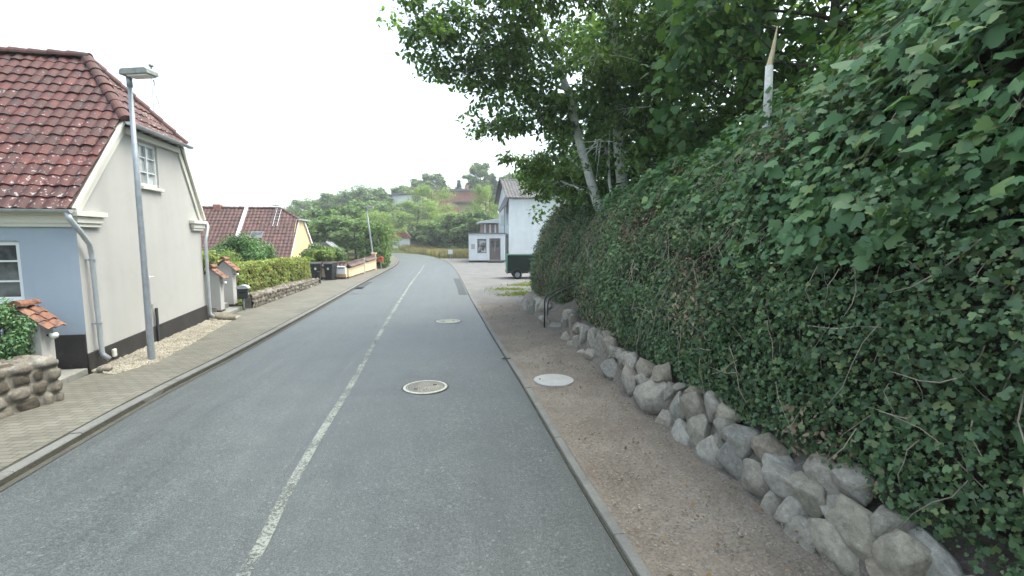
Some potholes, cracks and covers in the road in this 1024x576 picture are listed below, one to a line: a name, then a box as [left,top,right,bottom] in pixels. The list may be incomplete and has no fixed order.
manhole cover [401,380,449,394]
manhole cover [534,374,574,388]
